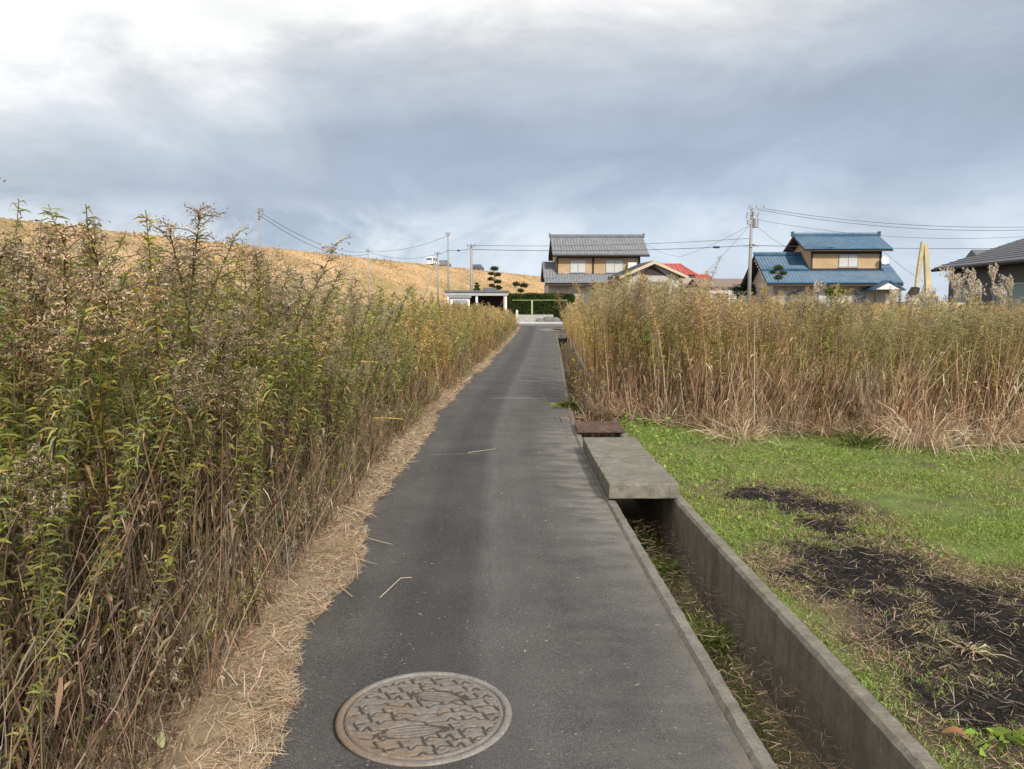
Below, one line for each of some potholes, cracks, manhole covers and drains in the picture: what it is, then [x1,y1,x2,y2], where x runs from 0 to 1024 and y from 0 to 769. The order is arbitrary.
manhole cover [332,671,512,767]
